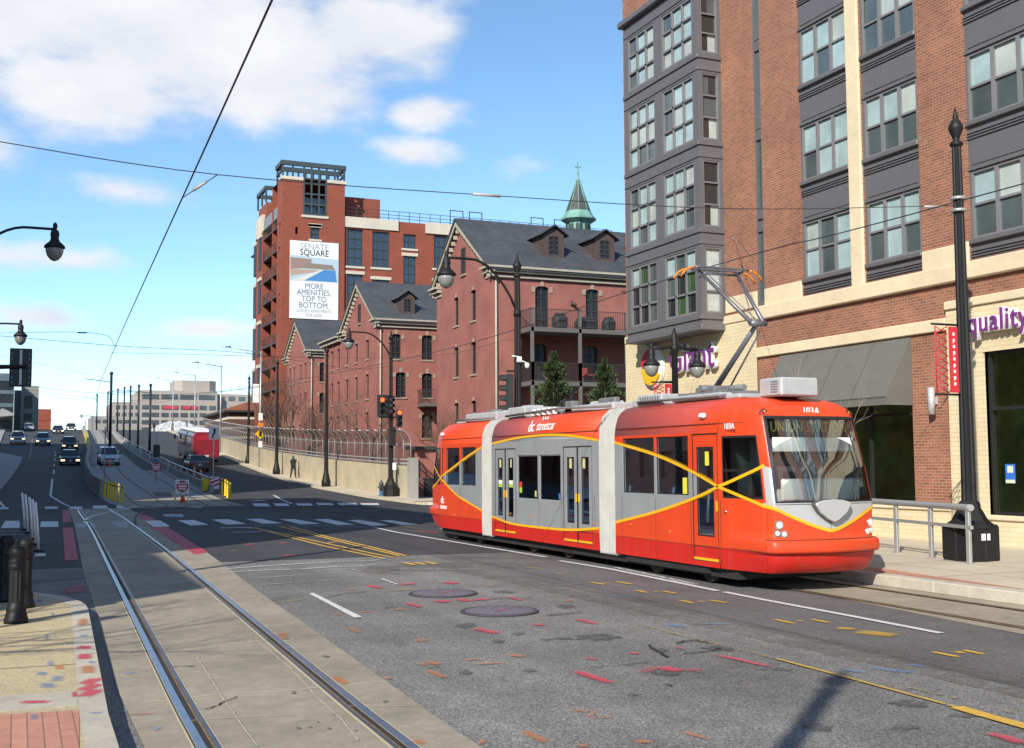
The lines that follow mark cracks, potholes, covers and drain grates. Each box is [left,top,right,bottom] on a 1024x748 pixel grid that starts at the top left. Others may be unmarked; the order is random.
crack [589,640,722,667]
manhole cover [408,589,478,598]
manhole cover [460,605,539,617]
